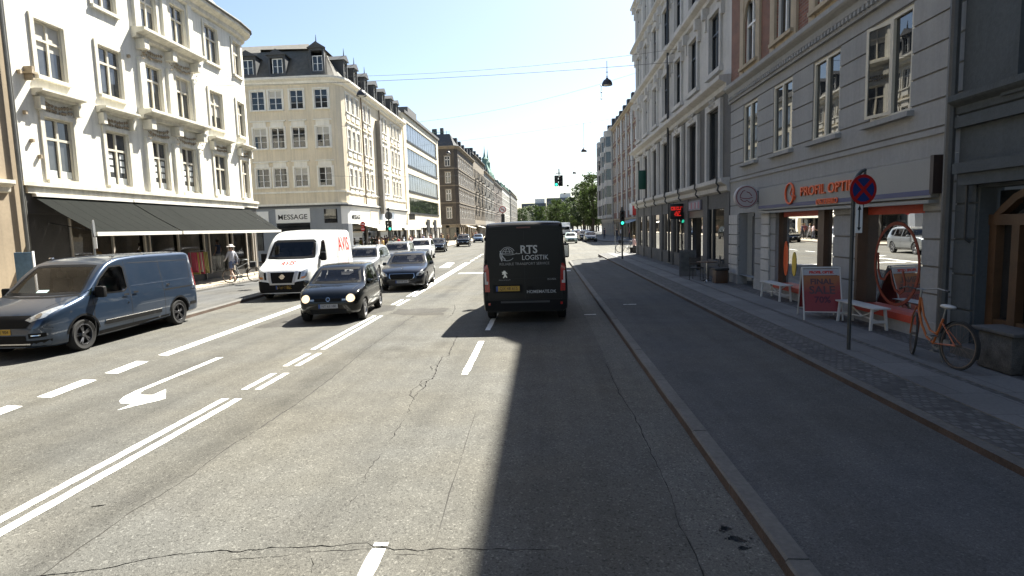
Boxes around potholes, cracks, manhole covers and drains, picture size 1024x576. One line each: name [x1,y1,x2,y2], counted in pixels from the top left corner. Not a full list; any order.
crack [39,543,551,576]
crack [350,337,457,503]
crack [605,363,704,576]
